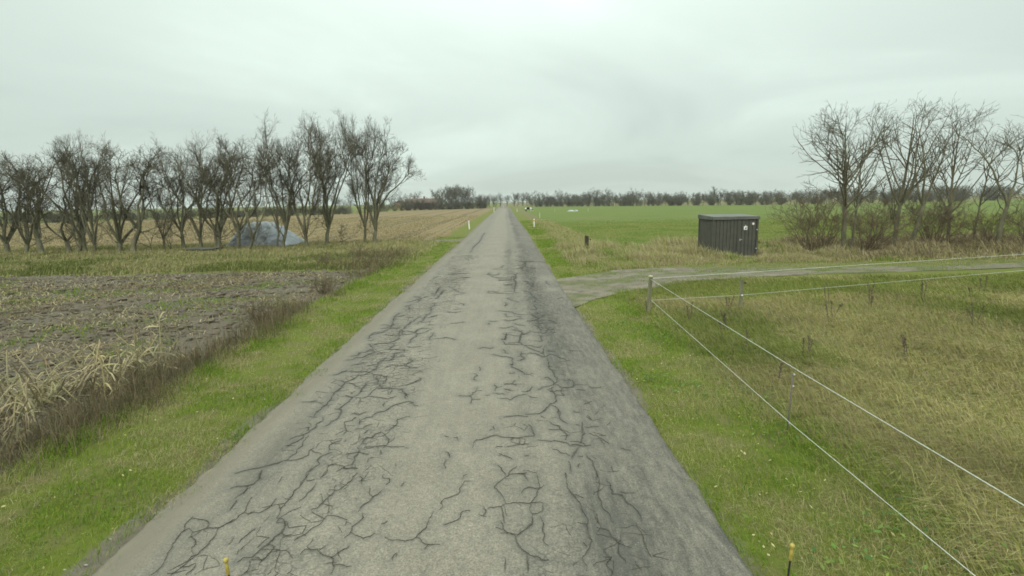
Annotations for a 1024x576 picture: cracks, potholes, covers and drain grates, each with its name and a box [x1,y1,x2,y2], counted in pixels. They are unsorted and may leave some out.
crack [149,250,669,576]
